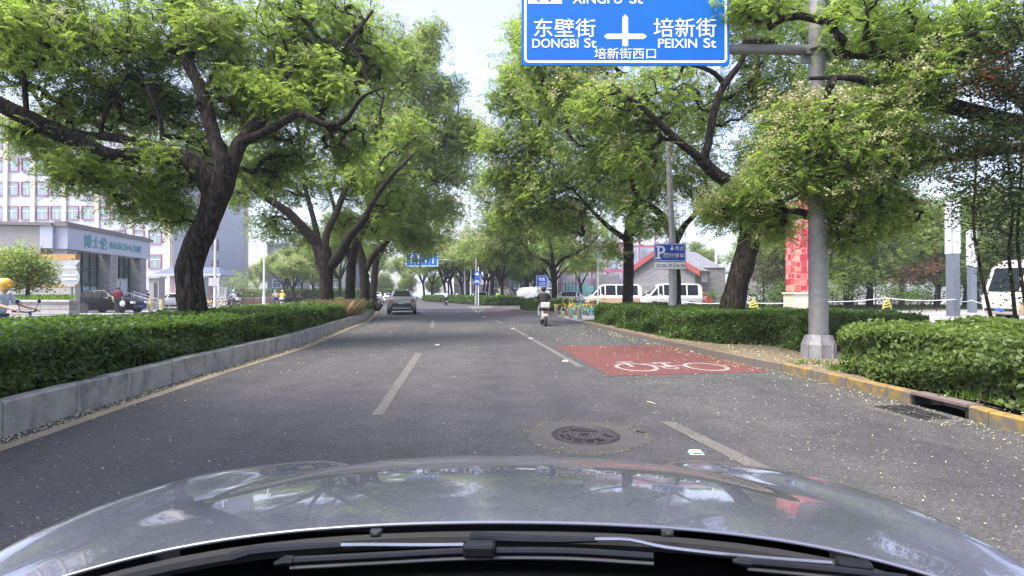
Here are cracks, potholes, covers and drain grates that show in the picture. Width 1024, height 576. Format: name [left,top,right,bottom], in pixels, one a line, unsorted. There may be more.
manhole cover [522,419,652,455]
drain grate [874,404,953,420]
